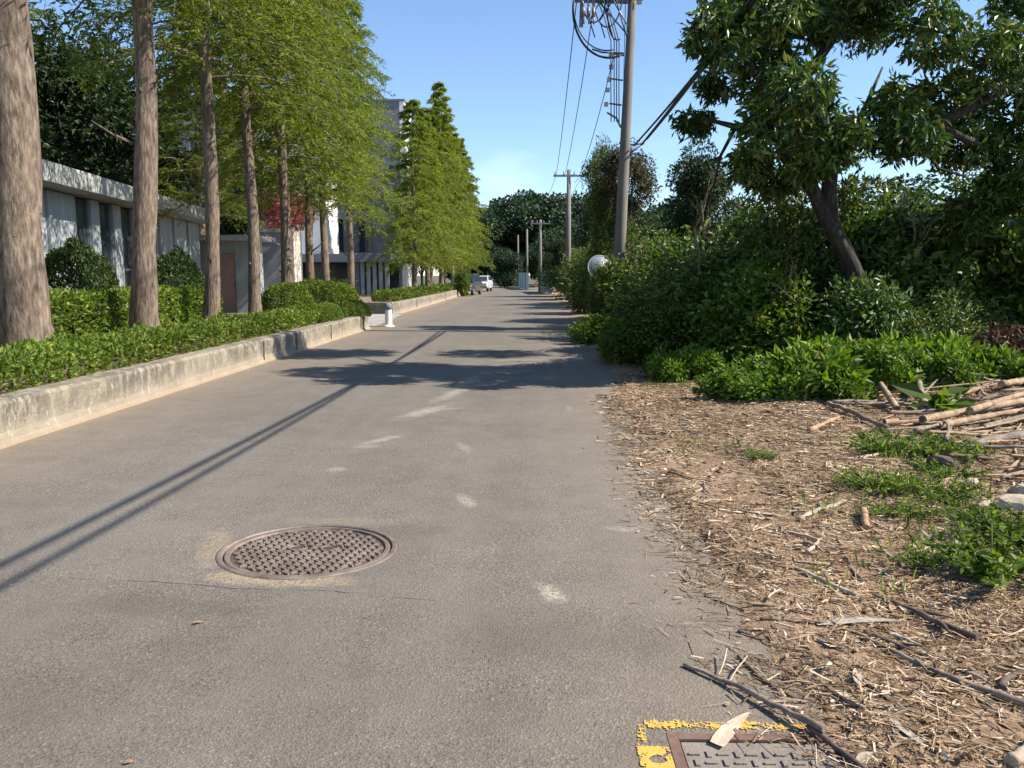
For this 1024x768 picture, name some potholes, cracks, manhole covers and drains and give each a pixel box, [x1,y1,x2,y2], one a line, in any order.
crack [79,579,441,602]
manhole cover [216,524,398,580]
manhole cover [666,733,857,768]
